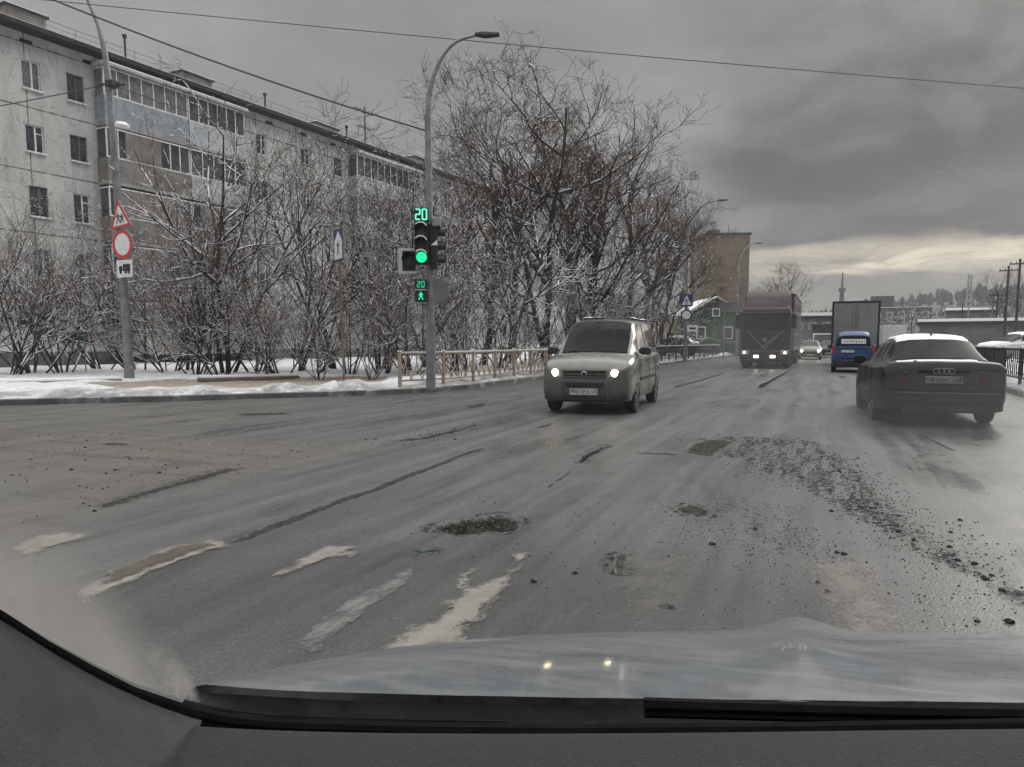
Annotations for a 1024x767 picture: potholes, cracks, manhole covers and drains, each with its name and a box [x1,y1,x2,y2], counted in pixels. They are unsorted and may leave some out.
pothole [431,513,524,535]
pothole [577,445,606,463]
pothole [680,439,736,457]
pothole [676,504,710,516]
pothole [614,554,628,574]
